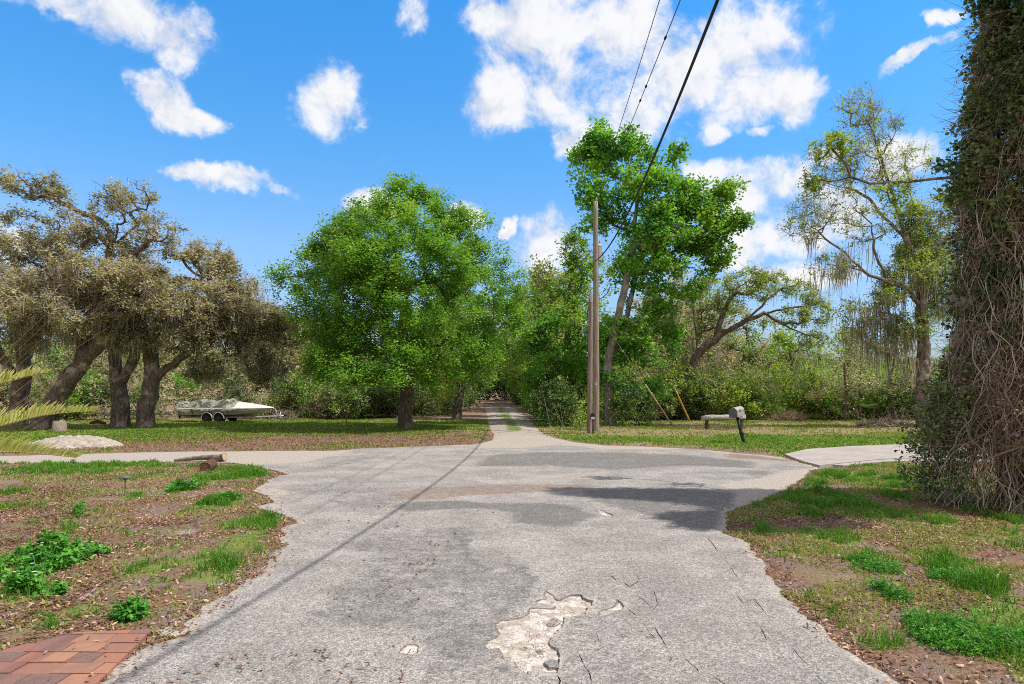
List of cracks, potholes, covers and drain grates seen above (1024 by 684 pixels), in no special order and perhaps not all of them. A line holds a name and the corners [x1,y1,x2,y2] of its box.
pothole [399,644,419,656]
crack [578,575,666,684]
pothole [484,589,593,674]
crack [708,539,824,683]
pothole [598,599,624,617]
